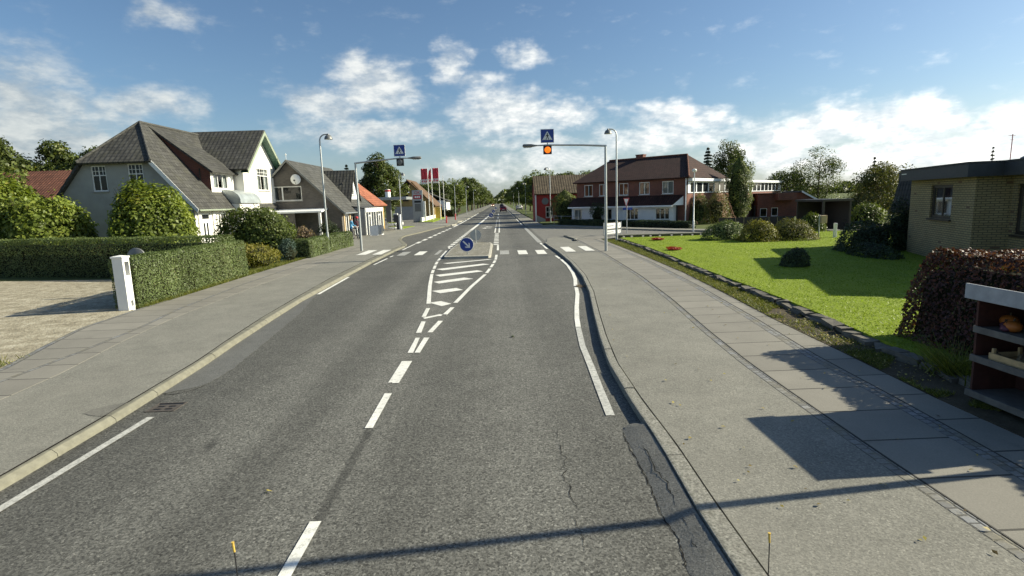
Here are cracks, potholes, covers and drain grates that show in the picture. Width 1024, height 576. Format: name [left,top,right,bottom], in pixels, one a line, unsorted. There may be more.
crack [643,447,687,523]
crack [557,437,585,550]
